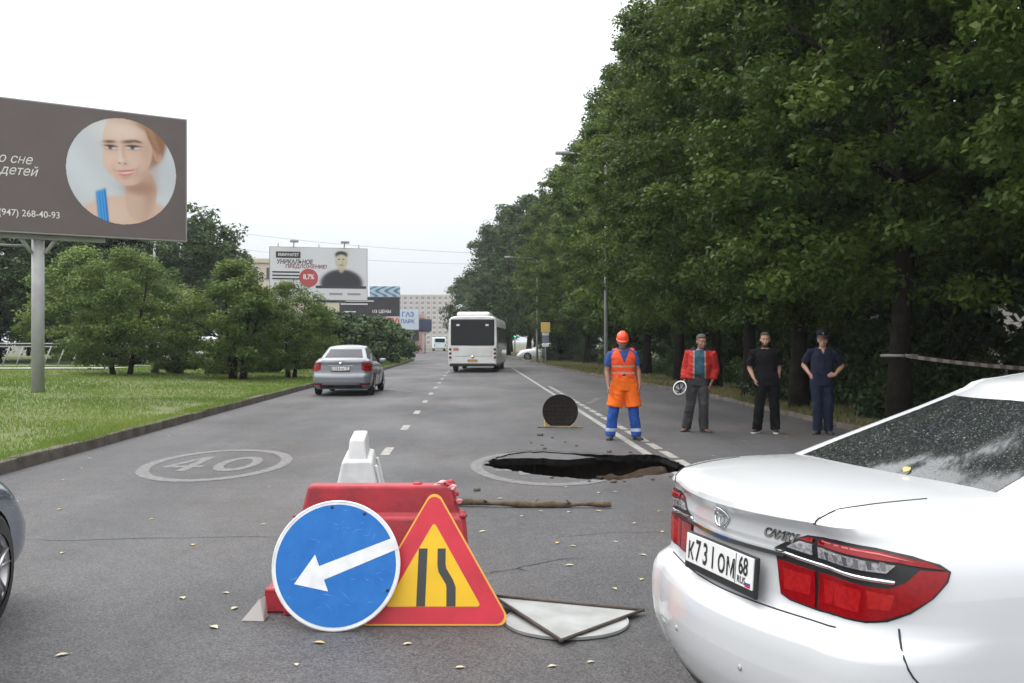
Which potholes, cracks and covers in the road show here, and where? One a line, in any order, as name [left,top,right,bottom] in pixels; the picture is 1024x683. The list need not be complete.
pothole [484,451,685,481]
